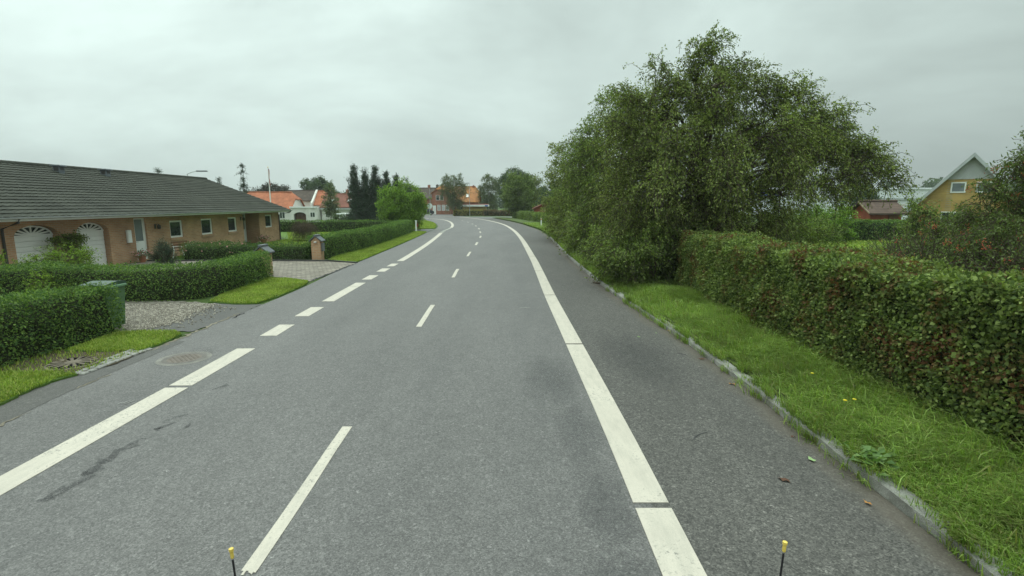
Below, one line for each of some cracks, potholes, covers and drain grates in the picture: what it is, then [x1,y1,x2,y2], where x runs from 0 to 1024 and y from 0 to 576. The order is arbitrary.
manhole cover [155,351,212,366]
drain grate [44,356,101,370]
